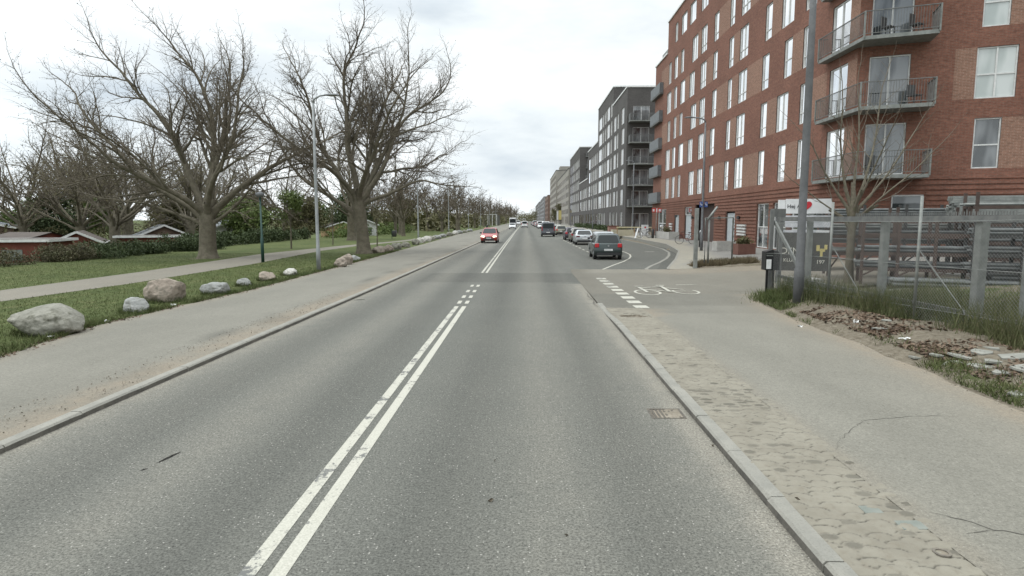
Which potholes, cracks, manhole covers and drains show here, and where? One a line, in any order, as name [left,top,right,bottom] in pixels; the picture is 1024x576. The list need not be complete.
crack [937,513,1024,535]
